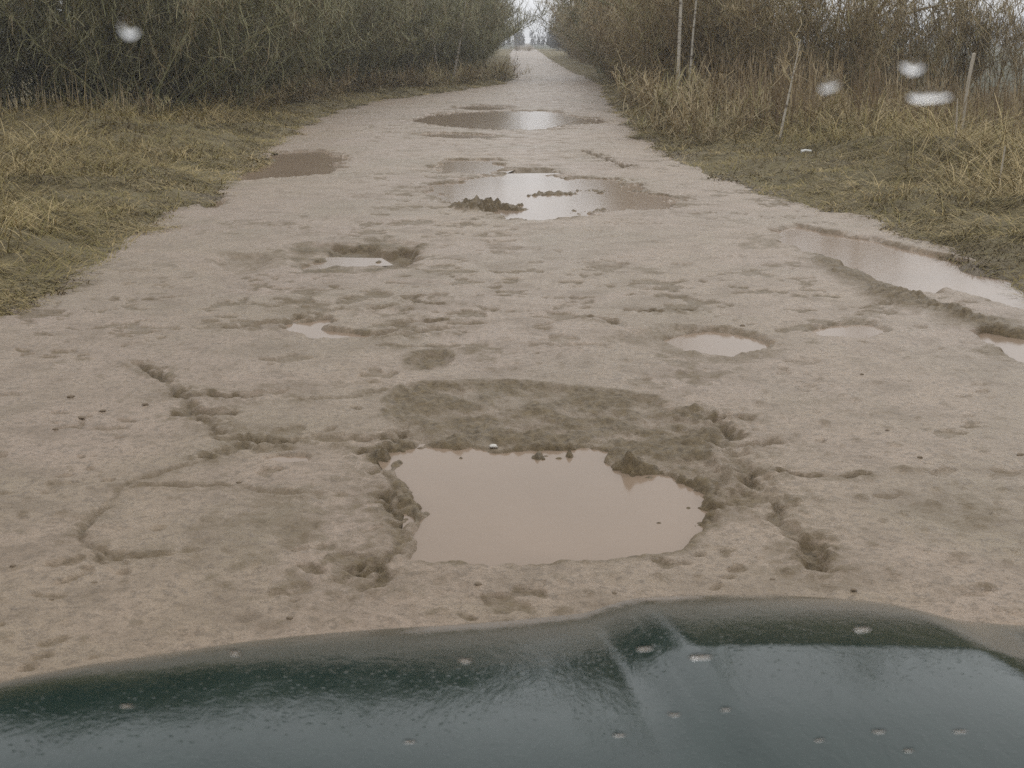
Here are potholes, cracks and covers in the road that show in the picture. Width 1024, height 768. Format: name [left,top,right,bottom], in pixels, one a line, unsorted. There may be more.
pothole [236,148,358,181]
pothole [375,379,735,566]
pothole [763,222,1024,309]
